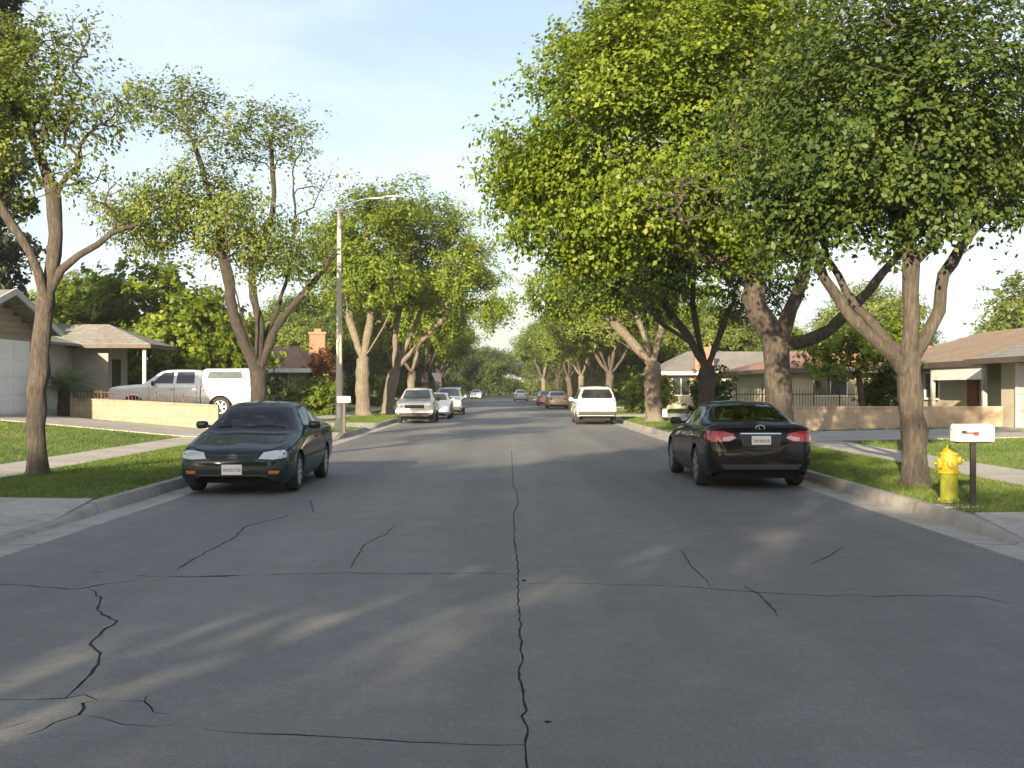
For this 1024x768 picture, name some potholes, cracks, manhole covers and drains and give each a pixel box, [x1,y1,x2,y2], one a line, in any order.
crack [0,571,171,735]
crack [137,450,1012,768]
